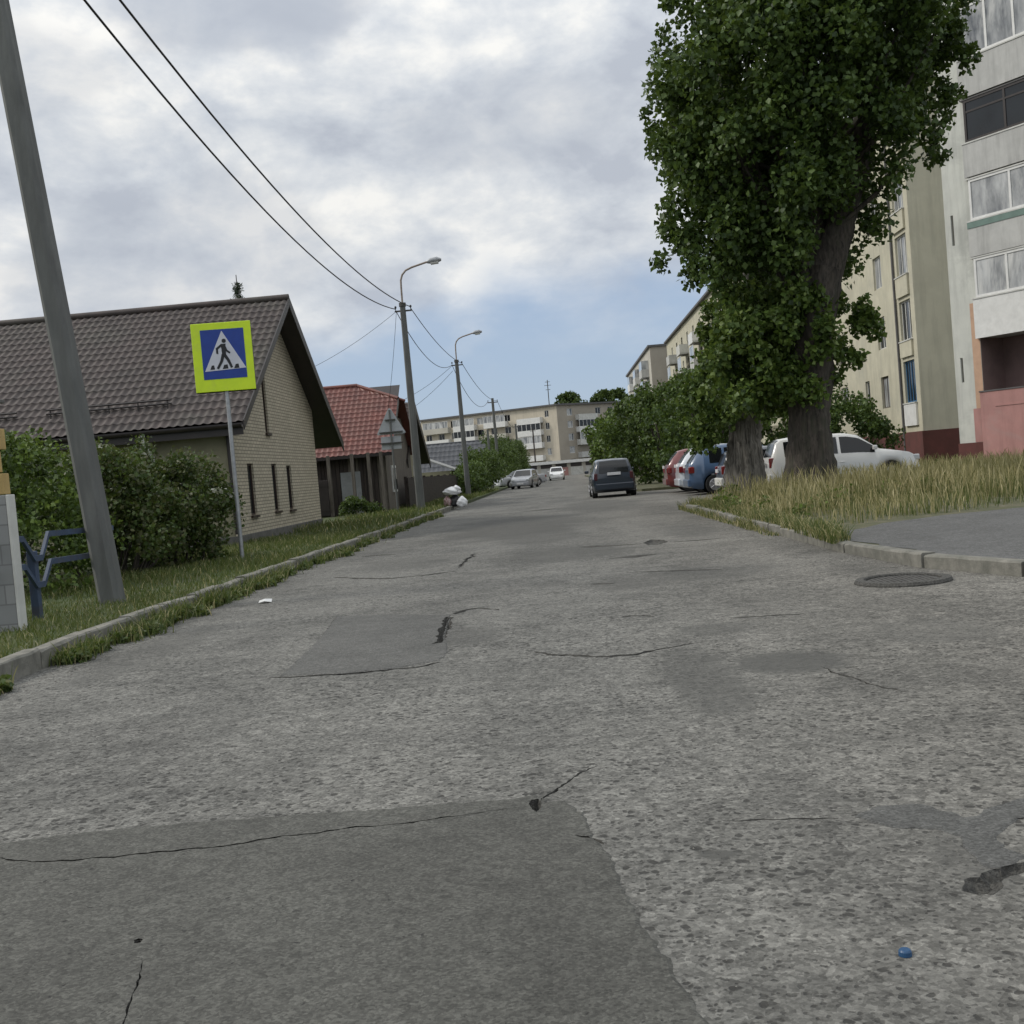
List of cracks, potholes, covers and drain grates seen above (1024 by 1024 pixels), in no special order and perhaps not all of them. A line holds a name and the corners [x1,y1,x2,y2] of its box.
crack [535,642,699,657]
manhole cover [854,572,953,588]
crack [824,667,905,692]
crack [334,553,477,579]
pothole [529,800,541,812]
pothole [962,862,1024,895]
crack [123,962,143,1024]
pothole [434,617,454,644]
crack [269,662,439,678]
crack [2,766,596,861]
